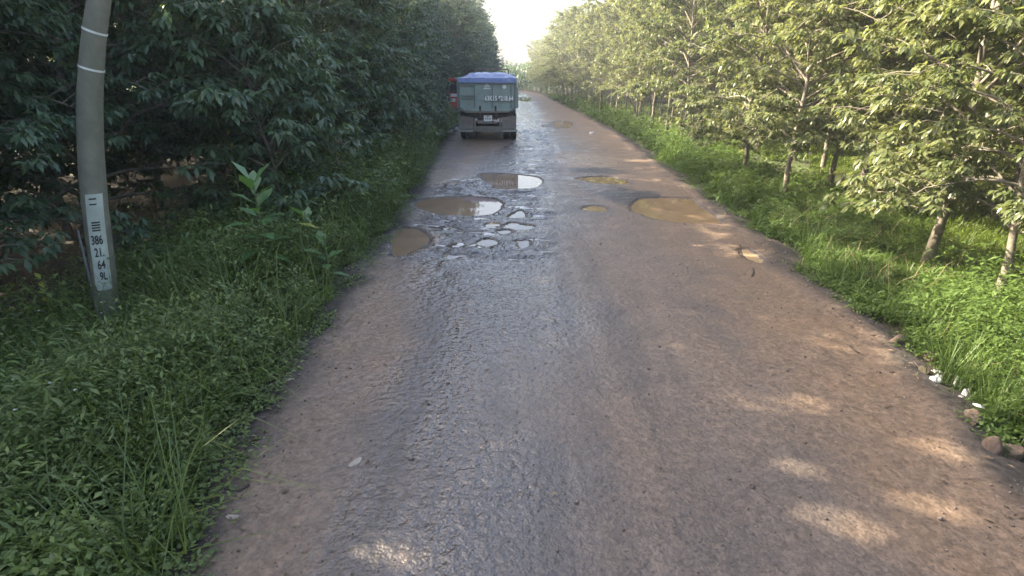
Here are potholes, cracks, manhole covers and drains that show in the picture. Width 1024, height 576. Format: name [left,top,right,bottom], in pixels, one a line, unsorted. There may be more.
pothole [477,173,544,190]
pothole [388,227,436,256]
pothole [475,238,499,247]
pothole [737,248,766,264]
pothole [507,210,527,218]
pothole [500,222,534,230]
pothole [515,239,531,248]
pothole [573,176,632,184]
pothole [542,121,579,129]
pothole [628,197,723,224]
pothole [412,196,504,217]
